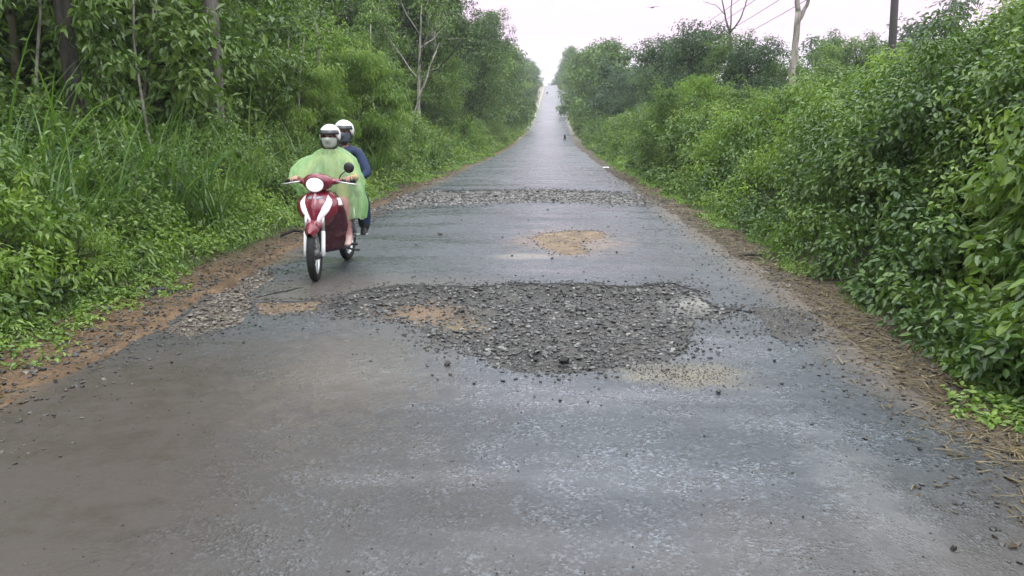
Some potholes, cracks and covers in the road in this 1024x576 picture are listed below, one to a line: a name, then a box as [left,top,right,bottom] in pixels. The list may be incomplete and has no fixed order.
pothole [356,189,662,221]
pothole [158,267,276,338]
pothole [254,299,324,315]
pothole [327,282,735,374]
